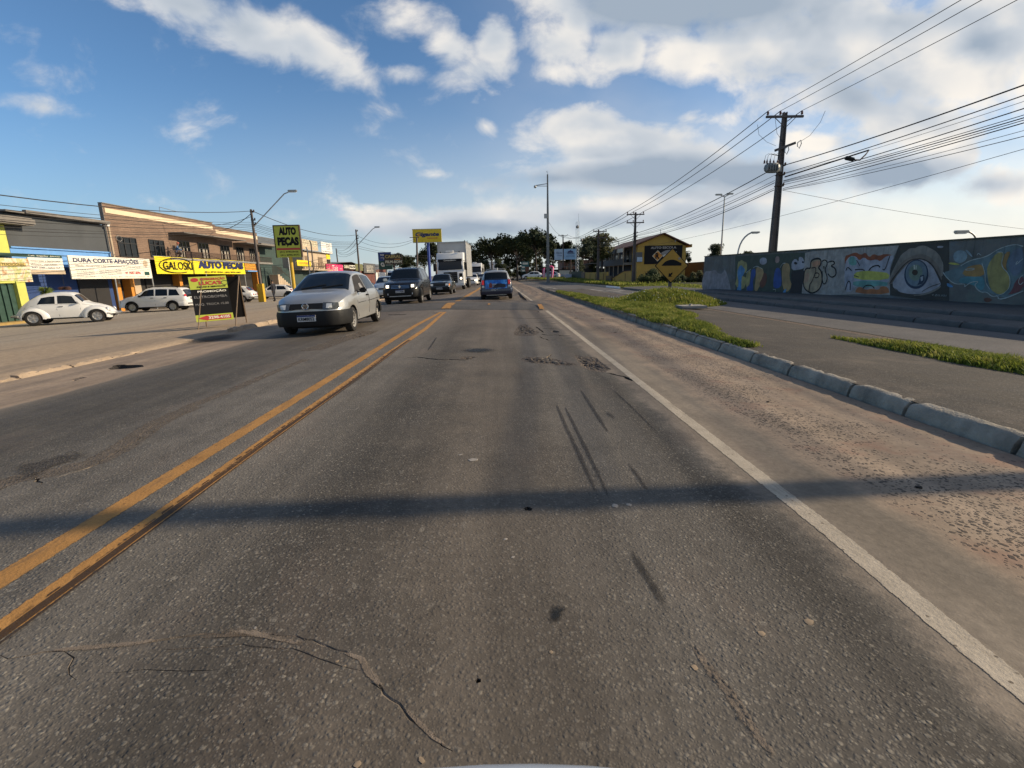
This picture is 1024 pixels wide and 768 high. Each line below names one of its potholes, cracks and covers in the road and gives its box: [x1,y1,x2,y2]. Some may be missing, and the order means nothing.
pothole [574,355,611,373]
pothole [521,357,576,366]
crack [0,633,452,751]
pothole [513,324,539,336]
